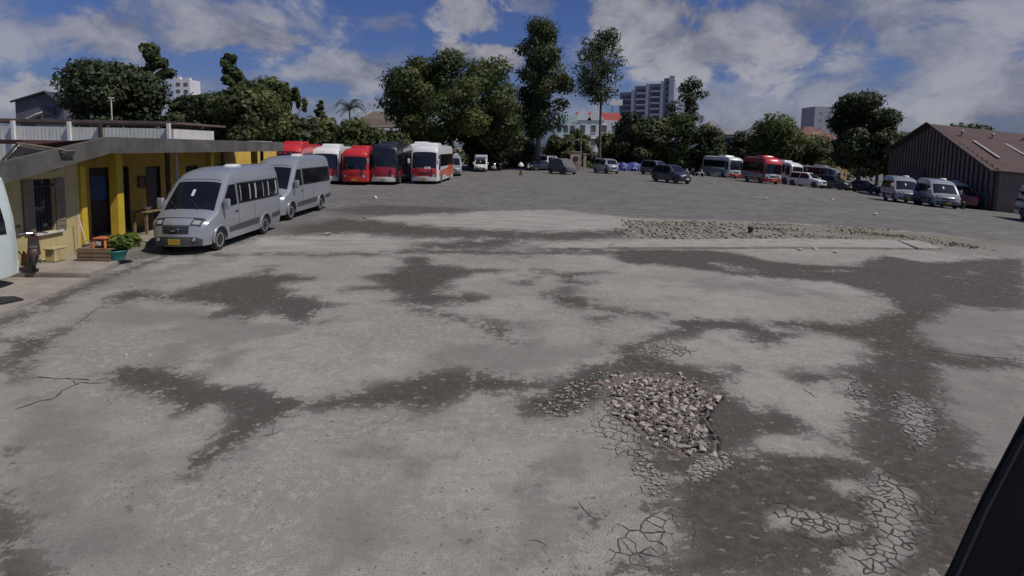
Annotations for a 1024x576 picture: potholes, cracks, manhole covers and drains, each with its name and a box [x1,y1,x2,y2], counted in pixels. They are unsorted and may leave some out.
crack [773,471,937,575]
crack [834,373,954,451]
crack [522,369,735,576]
crack [16,376,119,409]
pothole [596,371,724,459]
